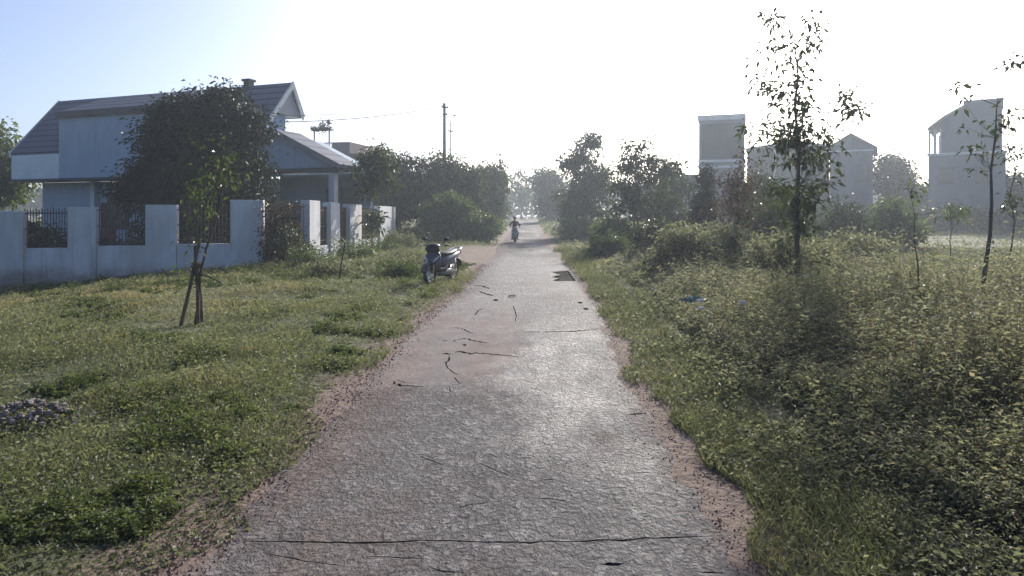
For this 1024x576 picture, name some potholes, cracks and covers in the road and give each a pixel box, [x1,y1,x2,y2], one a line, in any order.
crack [442,285,518,392]
pothole [553,271,575,281]
